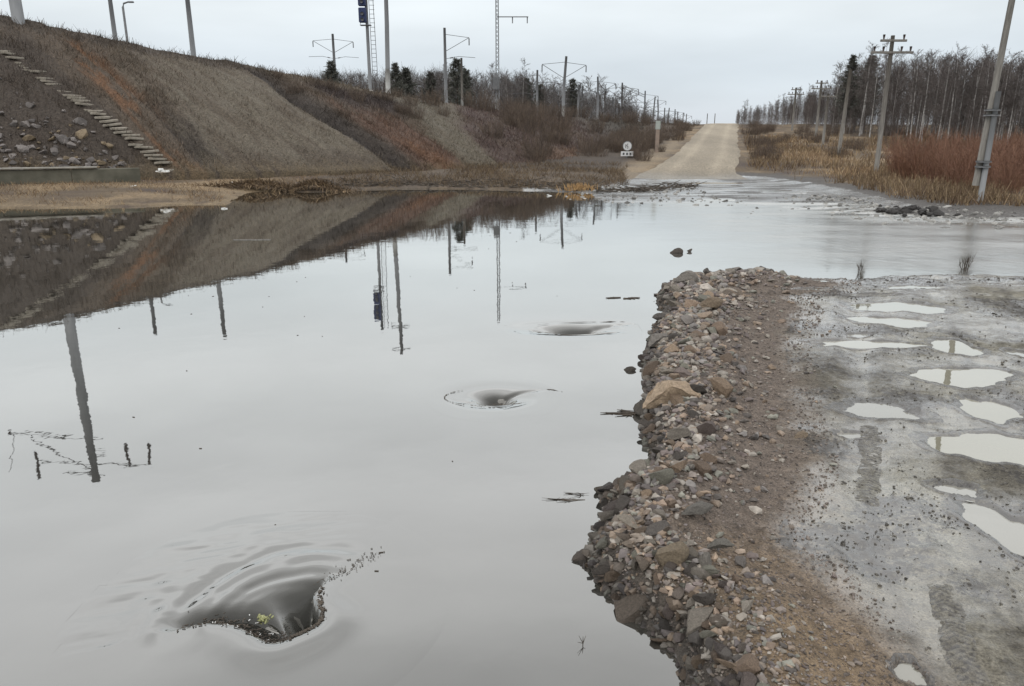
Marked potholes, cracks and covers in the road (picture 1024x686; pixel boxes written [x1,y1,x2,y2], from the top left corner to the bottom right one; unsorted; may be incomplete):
pothole [797,337,931,351]
pothole [941,492,1024,563]
pothole [823,396,944,424]
pothole [918,478,992,504]
pothole [949,392,1024,429]
pothole [835,315,945,330]
pothole [885,653,937,686]
pothole [908,427,1024,468]
pothole [894,364,1024,390]
pothole [838,299,960,316]
pothole [924,336,992,358]
